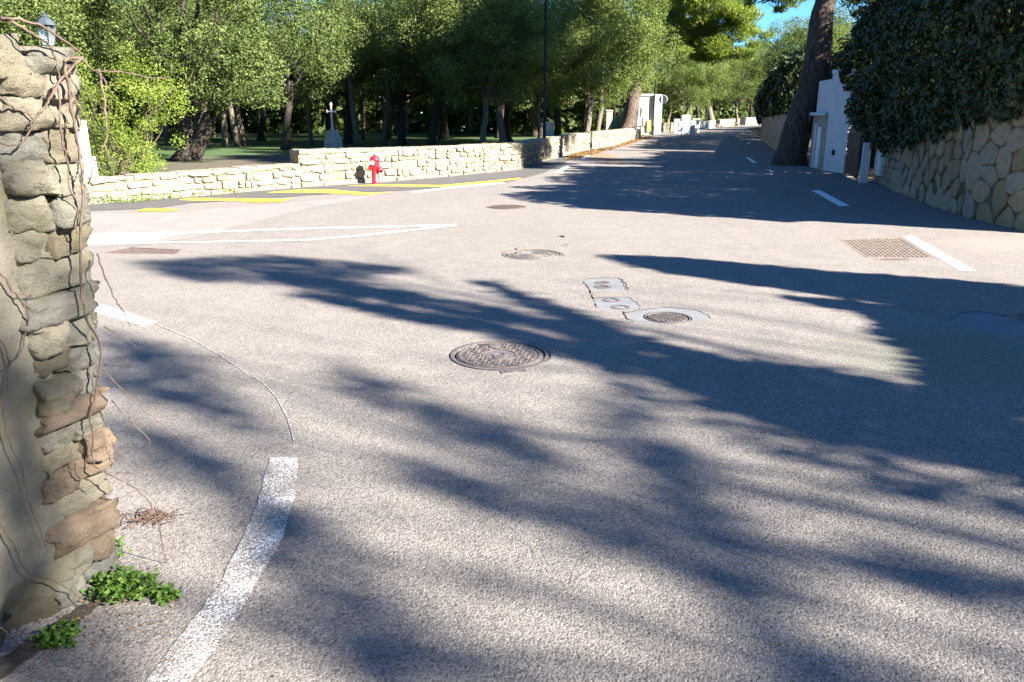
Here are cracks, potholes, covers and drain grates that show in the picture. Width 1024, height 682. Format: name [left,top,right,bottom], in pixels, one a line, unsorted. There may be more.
drain grate [839,238,933,258]
manhole cover [502,247,563,260]
manhole cover [449,341,551,374]
